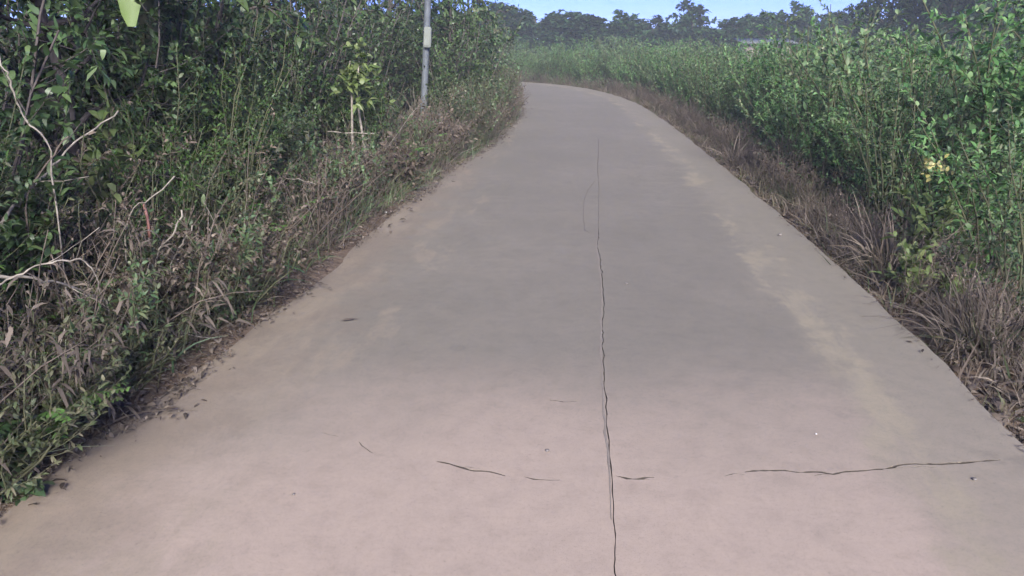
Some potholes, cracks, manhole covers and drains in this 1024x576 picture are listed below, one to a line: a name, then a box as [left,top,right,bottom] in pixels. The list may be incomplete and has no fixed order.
crack [583,139,654,576]
crack [726,460,998,476]
crack [437,461,544,480]
